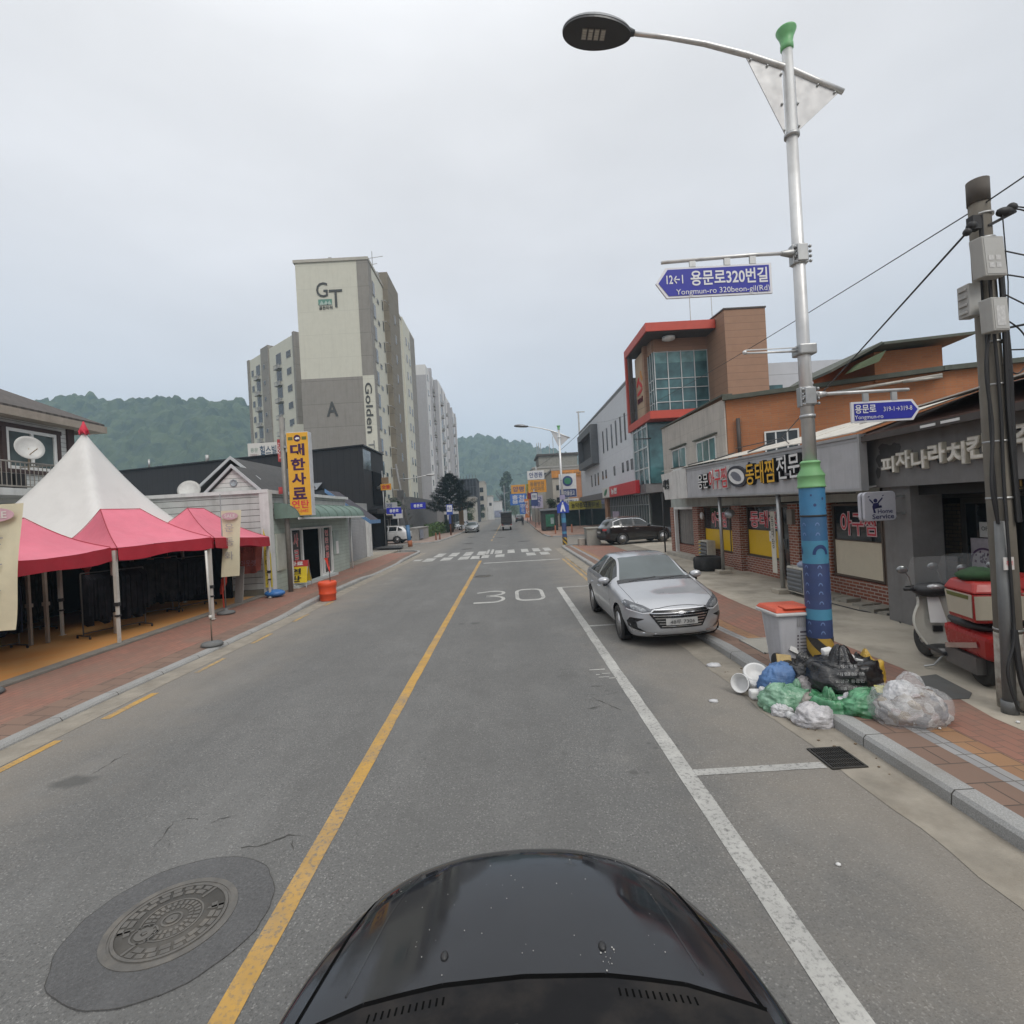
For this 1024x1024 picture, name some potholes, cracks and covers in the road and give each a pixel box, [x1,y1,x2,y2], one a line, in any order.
crack [241,834,294,850]
manhole cover [44,856,275,1013]
drain grate [807,746,869,770]
